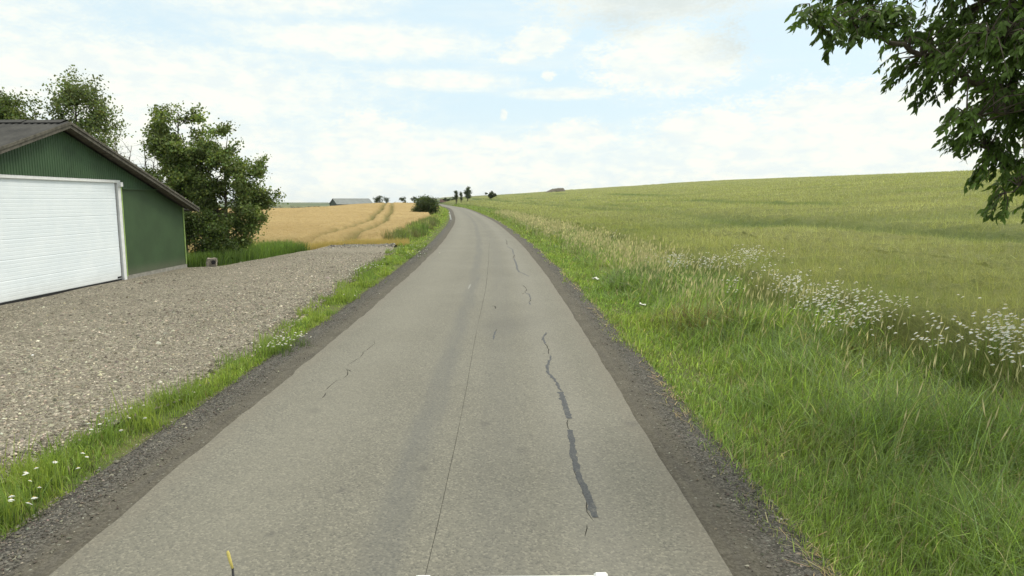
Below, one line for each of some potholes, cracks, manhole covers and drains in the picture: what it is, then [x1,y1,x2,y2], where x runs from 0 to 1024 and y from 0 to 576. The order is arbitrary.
crack [505,239,531,305]
